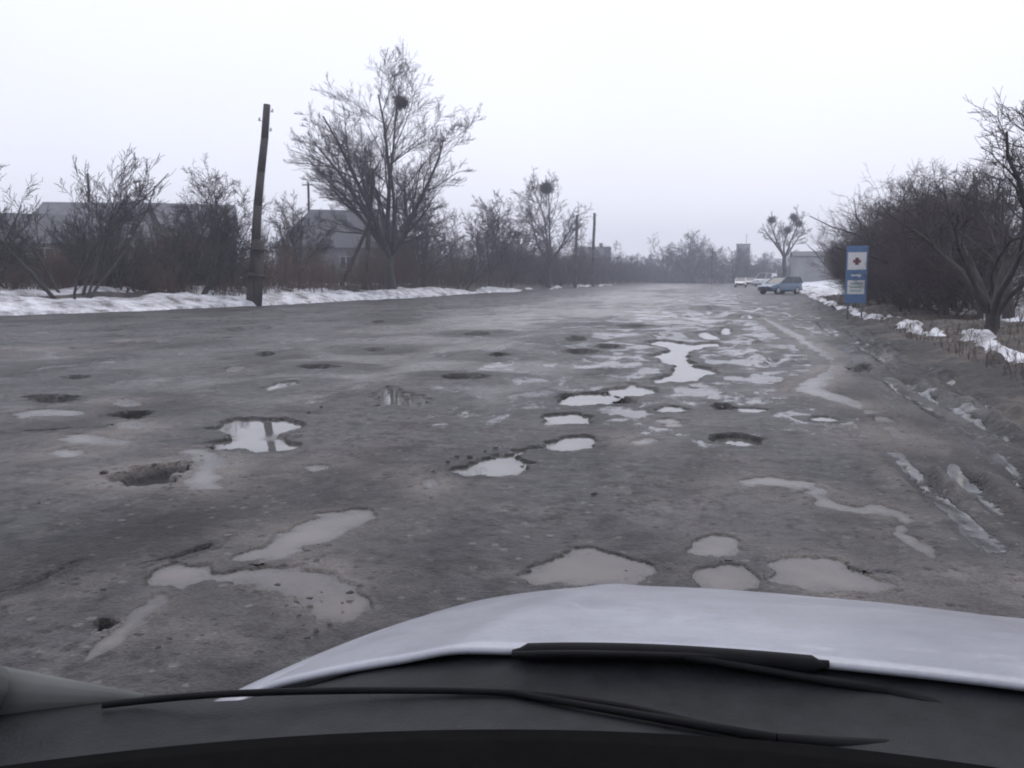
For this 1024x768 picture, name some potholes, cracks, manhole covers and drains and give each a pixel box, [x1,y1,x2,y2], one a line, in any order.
pothole [509,543,665,587]
pothole [98,409,167,419]
pothole [544,391,621,407]
pothole [3,393,89,405]
pothole [698,431,777,449]
pothole [527,432,616,453]
pothole [190,415,314,455]
pothole [676,531,761,562]
pothole [92,456,190,488]
pothole [633,339,735,386]
pothole [444,444,545,479]
pothole [133,557,397,629]
